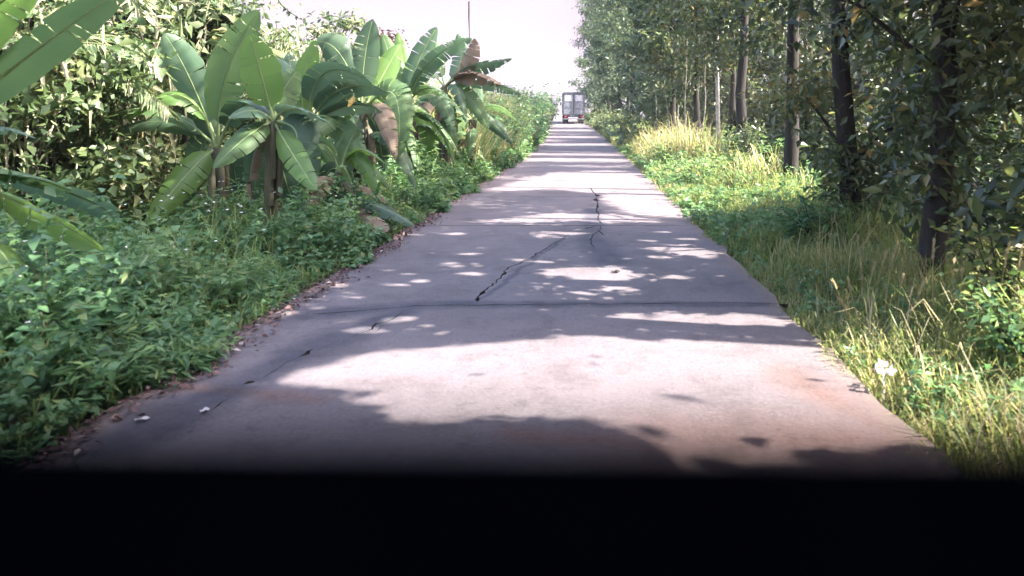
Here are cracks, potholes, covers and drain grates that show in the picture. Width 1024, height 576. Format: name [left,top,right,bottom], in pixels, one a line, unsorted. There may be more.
crack [475,188,608,302]
crack [203,312,403,413]
